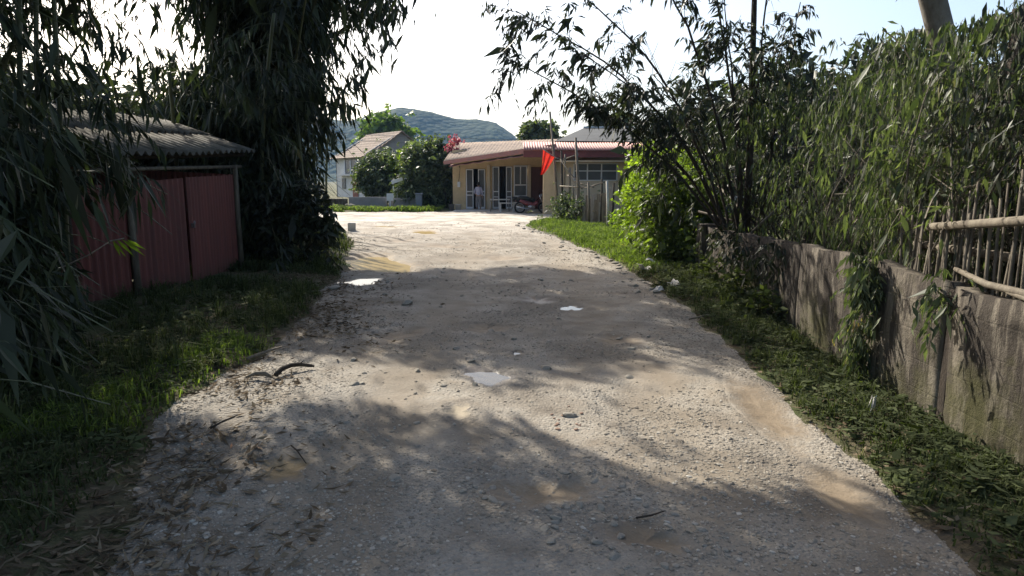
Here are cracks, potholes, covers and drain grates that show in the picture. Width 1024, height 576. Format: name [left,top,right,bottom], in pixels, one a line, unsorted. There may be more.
pothole [252,453,318,485]
pothole [591,521,702,557]
pothole [480,474,619,511]
